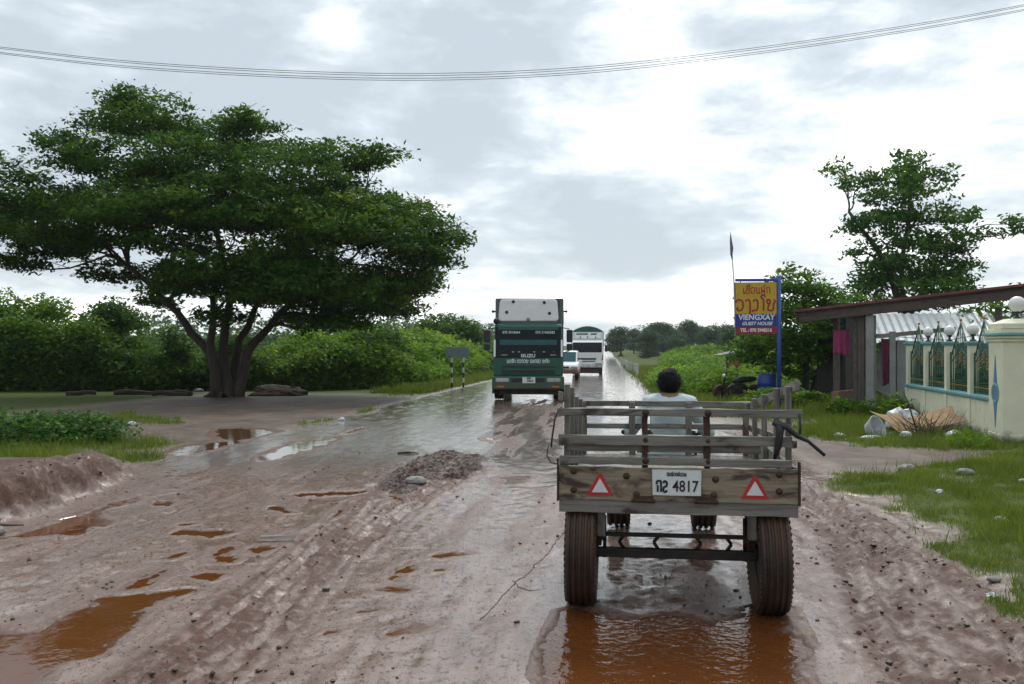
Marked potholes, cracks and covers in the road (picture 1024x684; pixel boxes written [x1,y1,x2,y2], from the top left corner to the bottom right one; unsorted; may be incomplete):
pothole [524,603,821,684]
pothole [0,588,203,684]
pothole [249,436,345,462]
pothole [0,490,179,541]
